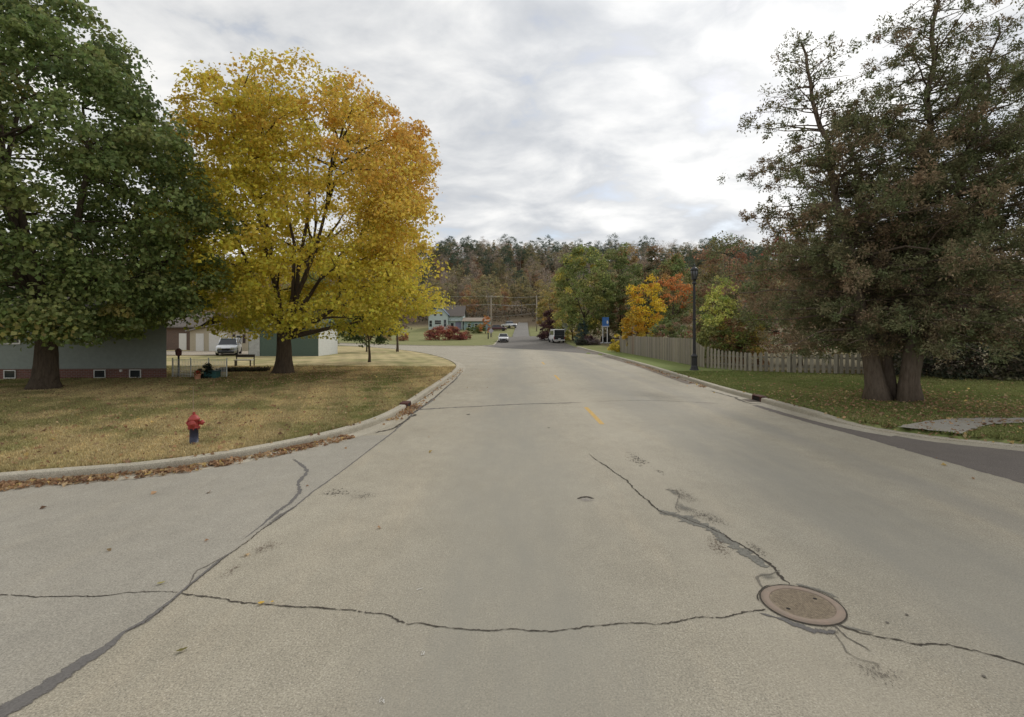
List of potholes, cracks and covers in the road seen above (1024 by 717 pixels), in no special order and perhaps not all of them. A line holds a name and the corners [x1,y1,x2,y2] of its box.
manhole cover [759,585,848,626]
crack [0,458,842,632]
crack [834,624,1024,664]
